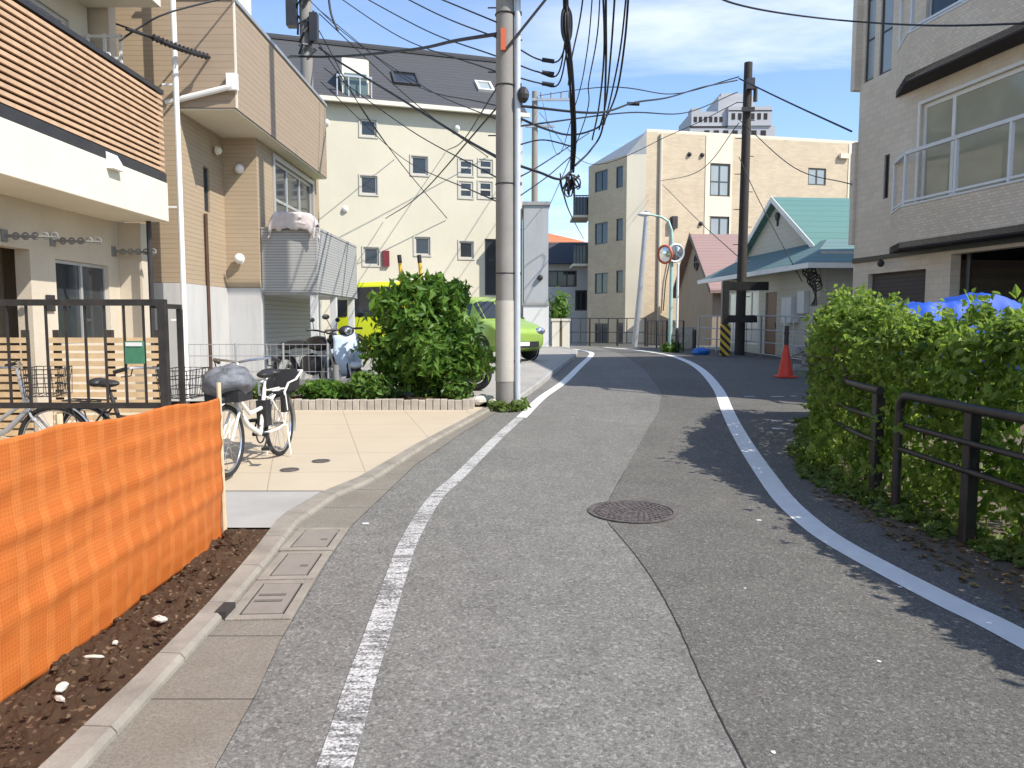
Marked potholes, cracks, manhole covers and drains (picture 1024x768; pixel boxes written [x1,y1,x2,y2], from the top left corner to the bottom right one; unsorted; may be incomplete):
manhole cover [588,500,677,523]
